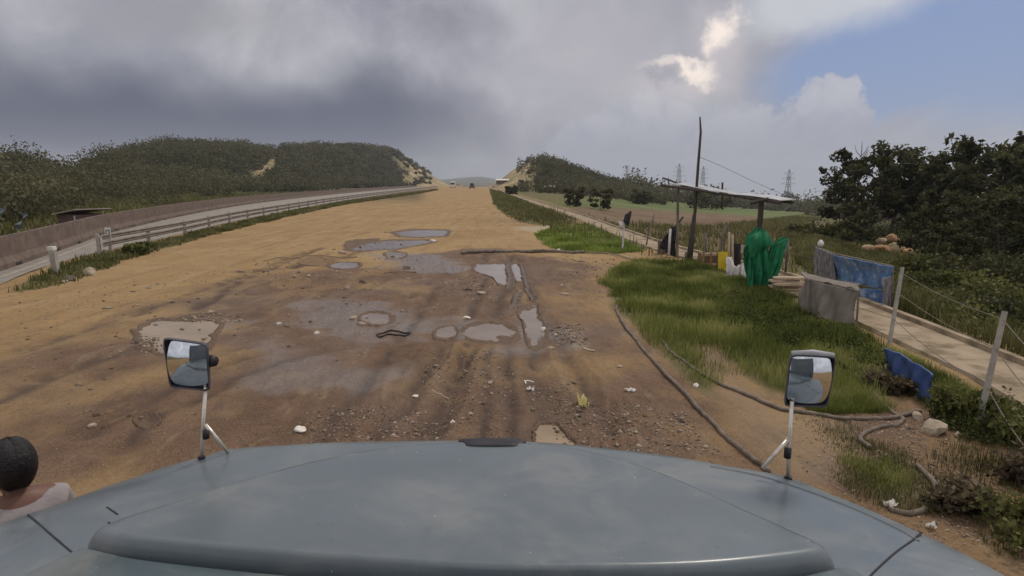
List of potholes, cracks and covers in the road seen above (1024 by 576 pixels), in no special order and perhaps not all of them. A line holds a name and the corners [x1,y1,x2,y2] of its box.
pothole [132,410,162,430]
pothole [516,303,550,351]
pothole [390,229,453,238]
pothole [341,239,439,252]
pothole [432,325,457,342]
pothole [357,310,396,327]
pothole [531,420,579,445]
pothole [471,262,510,289]
pothole [326,261,363,270]
pothole [460,320,521,344]
pothole [382,251,408,260]
pothole [129,317,226,358]
